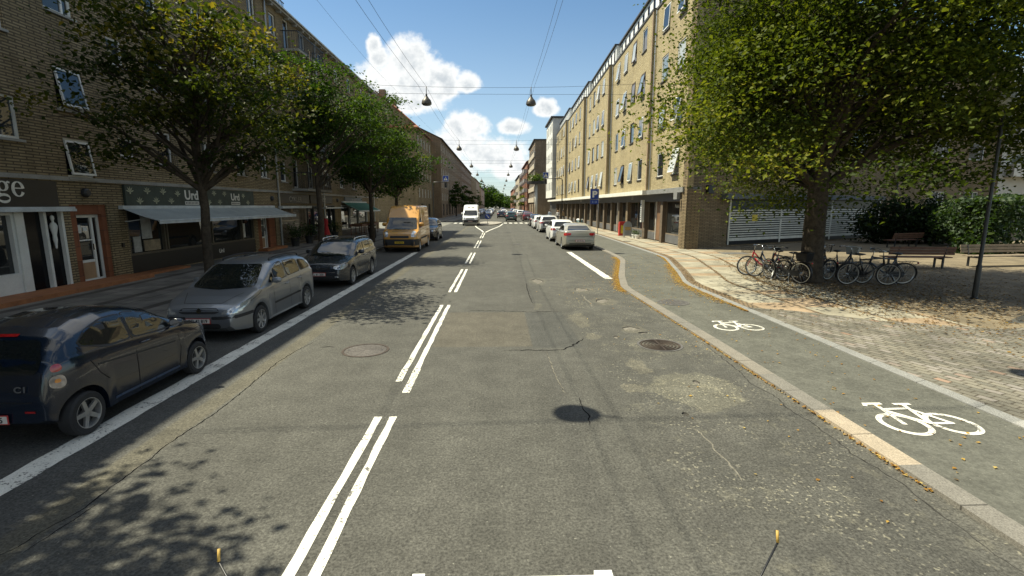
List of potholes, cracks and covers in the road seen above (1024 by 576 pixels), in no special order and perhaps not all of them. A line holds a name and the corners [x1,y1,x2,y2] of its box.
crack [509,338,590,425]
manhole cover [637,339,683,352]
manhole cover [341,344,389,357]
crack [689,425,742,481]
